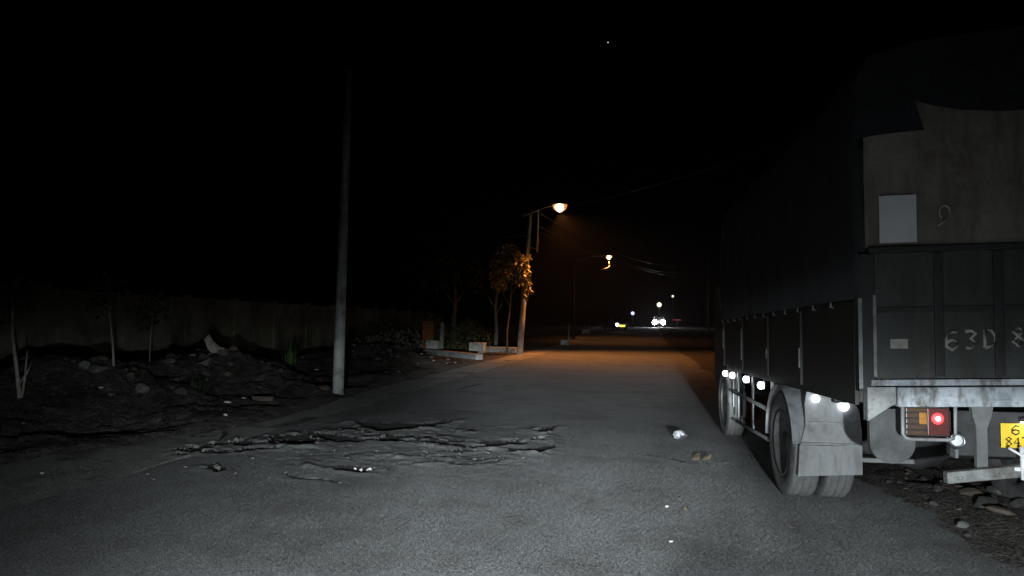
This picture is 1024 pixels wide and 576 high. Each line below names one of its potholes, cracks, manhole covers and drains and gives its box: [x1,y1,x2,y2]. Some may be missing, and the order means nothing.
pothole [508,444,556,452]
pothole [172,429,544,455]
pothole [355,420,453,431]
crack [286,474,338,482]
